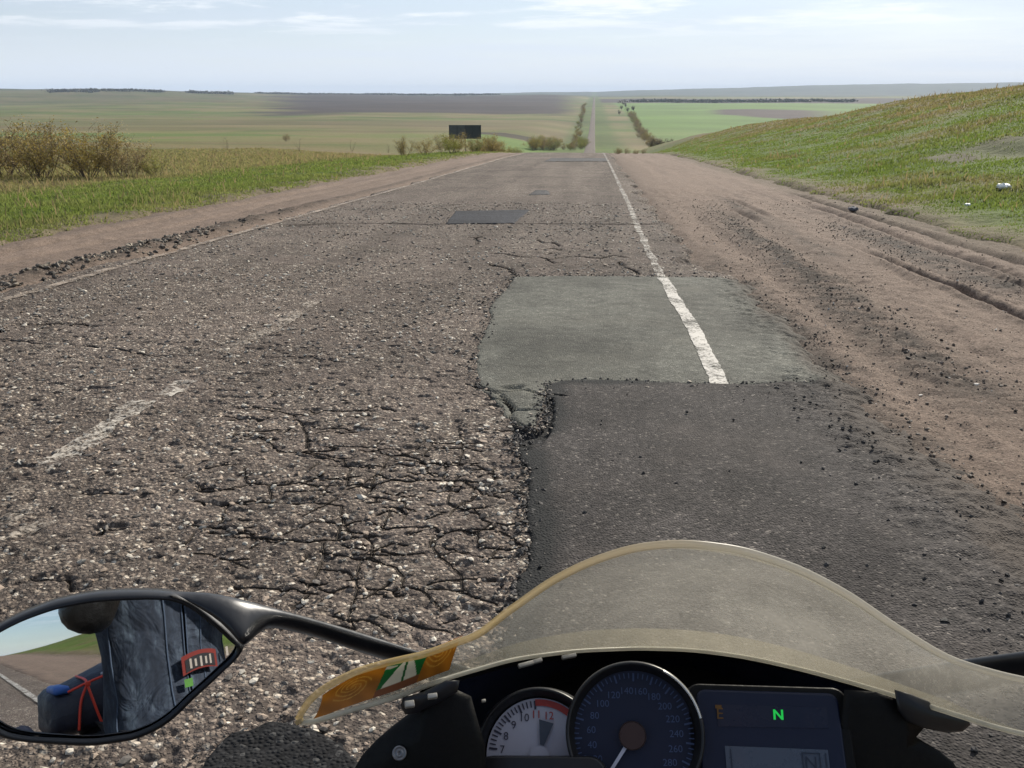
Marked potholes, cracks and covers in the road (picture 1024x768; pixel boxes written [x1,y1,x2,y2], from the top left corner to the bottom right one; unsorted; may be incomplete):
crack [175,390,524,636]
pothole [510,403,553,448]
crack [490,240,640,283]
